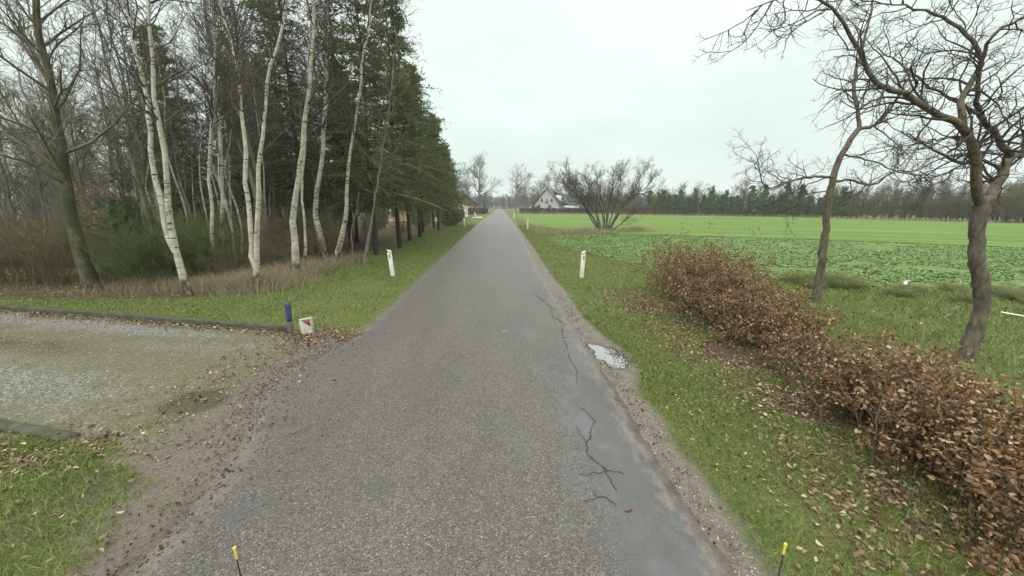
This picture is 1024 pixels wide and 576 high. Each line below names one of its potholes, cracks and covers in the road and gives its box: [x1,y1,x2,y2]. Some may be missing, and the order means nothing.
crack [576,408,624,505]
pothole [585,341,632,370]
crack [540,298,578,385]
